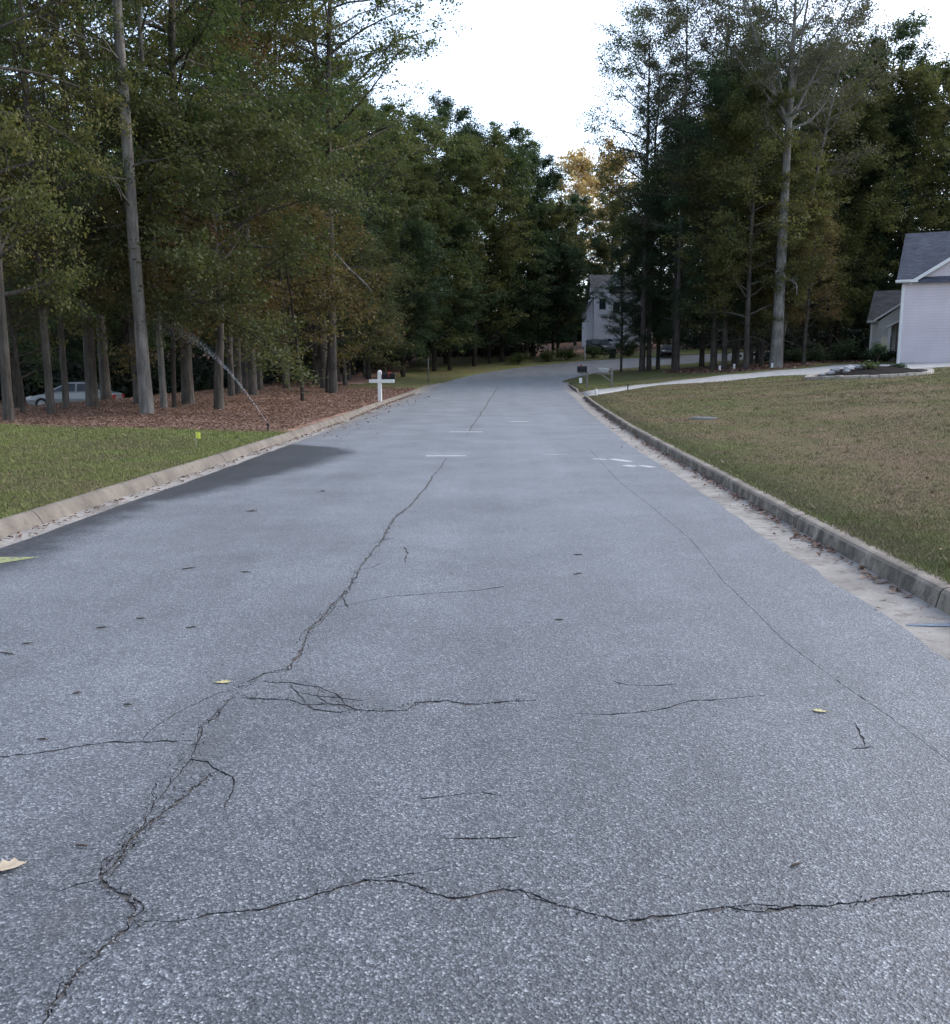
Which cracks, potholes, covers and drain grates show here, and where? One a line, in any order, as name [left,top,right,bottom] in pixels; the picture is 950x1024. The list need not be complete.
crack [42,458,536,1024]
crack [143,867,950,923]
crack [854,724,869,749]
crack [608,695,764,715]
crack [0,687,237,758]
